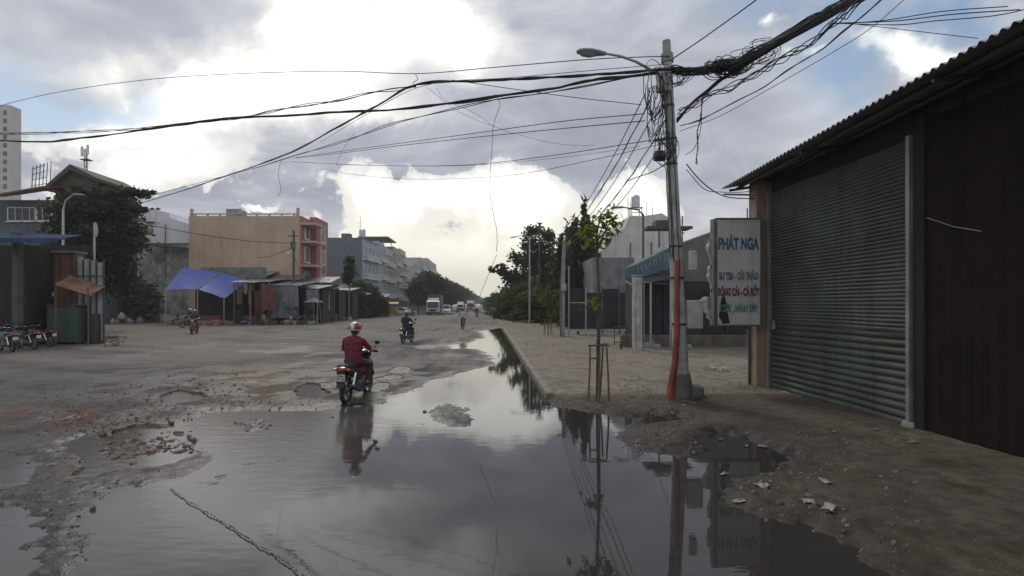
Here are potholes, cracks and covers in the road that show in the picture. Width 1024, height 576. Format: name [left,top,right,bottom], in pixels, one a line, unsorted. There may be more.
crack [171,489,305,576]
pothole [157,389,210,405]
pothole [62,421,202,479]
